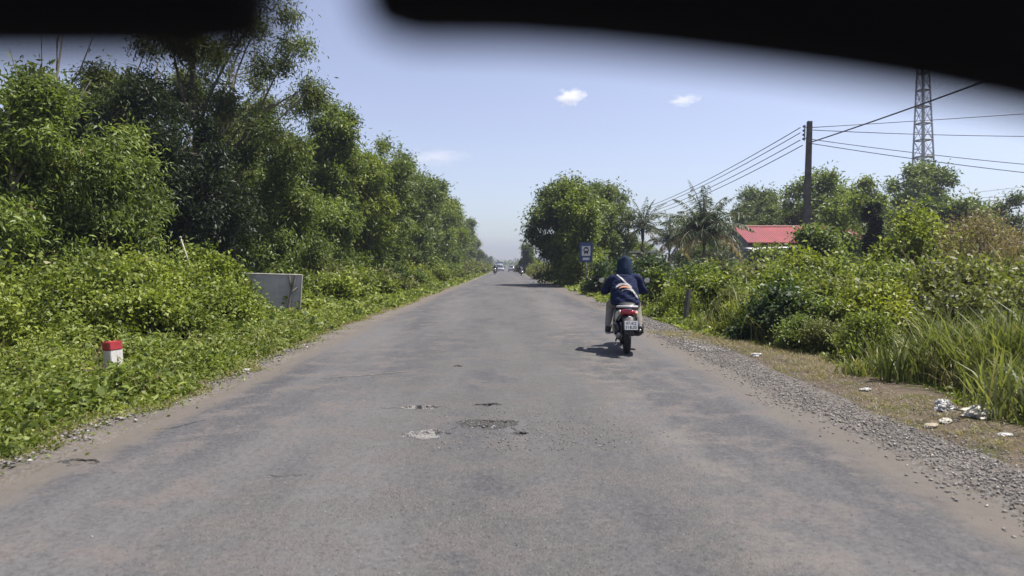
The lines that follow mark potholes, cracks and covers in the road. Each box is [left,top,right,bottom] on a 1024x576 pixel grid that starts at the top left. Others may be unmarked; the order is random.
pothole [397,428,458,441]
pothole [447,418,526,432]
